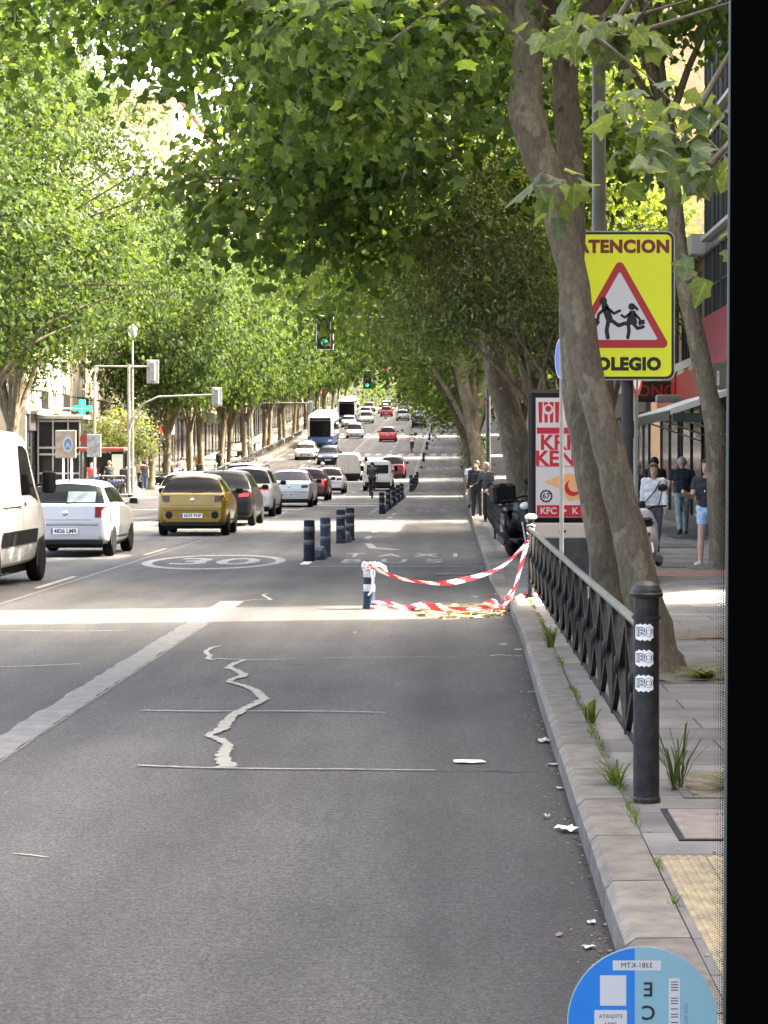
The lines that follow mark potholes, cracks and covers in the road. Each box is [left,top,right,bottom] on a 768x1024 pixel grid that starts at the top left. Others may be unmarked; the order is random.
manhole cover [660,808,724,841]
